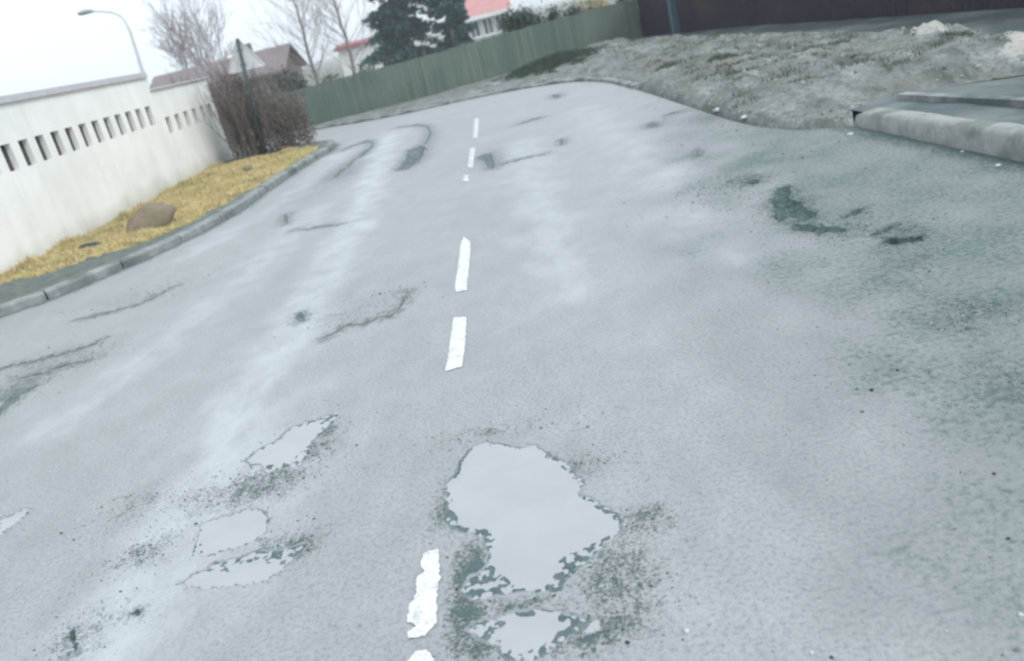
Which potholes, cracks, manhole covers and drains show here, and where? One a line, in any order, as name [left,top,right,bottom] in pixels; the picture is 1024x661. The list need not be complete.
crack [77,286,175,320]
crack [0,338,105,415]
pothole [767,185,819,223]
pothole [460,602,609,661]
pothole [0,507,34,535]
pothole [438,439,626,601]
crack [404,124,432,144]
pothole [881,235,928,245]
pothole [192,506,273,557]
pothole [175,540,310,590]
crack [322,289,407,341]
